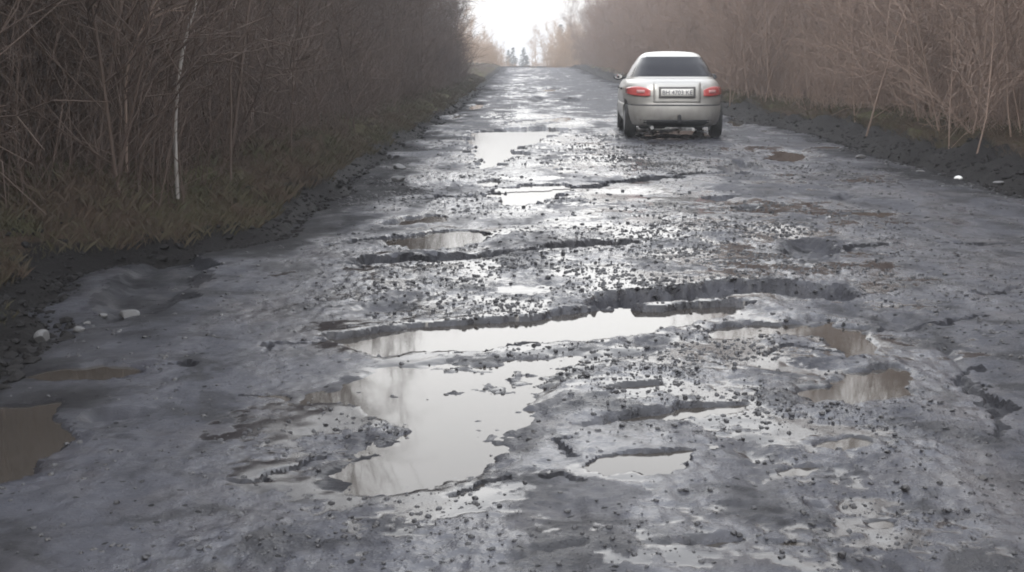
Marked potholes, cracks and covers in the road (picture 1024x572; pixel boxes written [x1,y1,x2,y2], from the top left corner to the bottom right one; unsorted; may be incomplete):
pothole [582,444,719,476]
pothole [318,297,760,357]
pothole [787,360,931,406]
pothole [758,313,897,358]
pothole [763,149,820,162]
pothole [457,126,571,169]
pothole [258,345,682,501]
pothole [490,182,572,193]
pothole [568,277,864,312]
